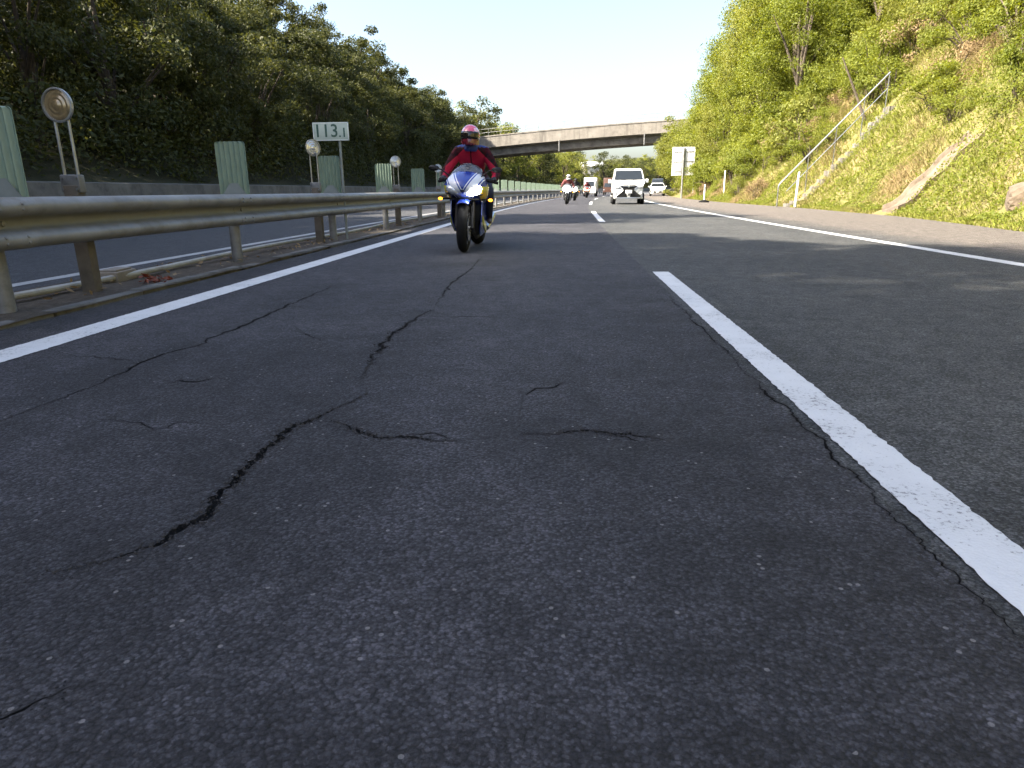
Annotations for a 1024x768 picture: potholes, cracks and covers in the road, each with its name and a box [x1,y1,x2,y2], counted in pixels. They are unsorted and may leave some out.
crack [0,680,71,728]
crack [517,424,672,444]
crack [0,260,482,583]
